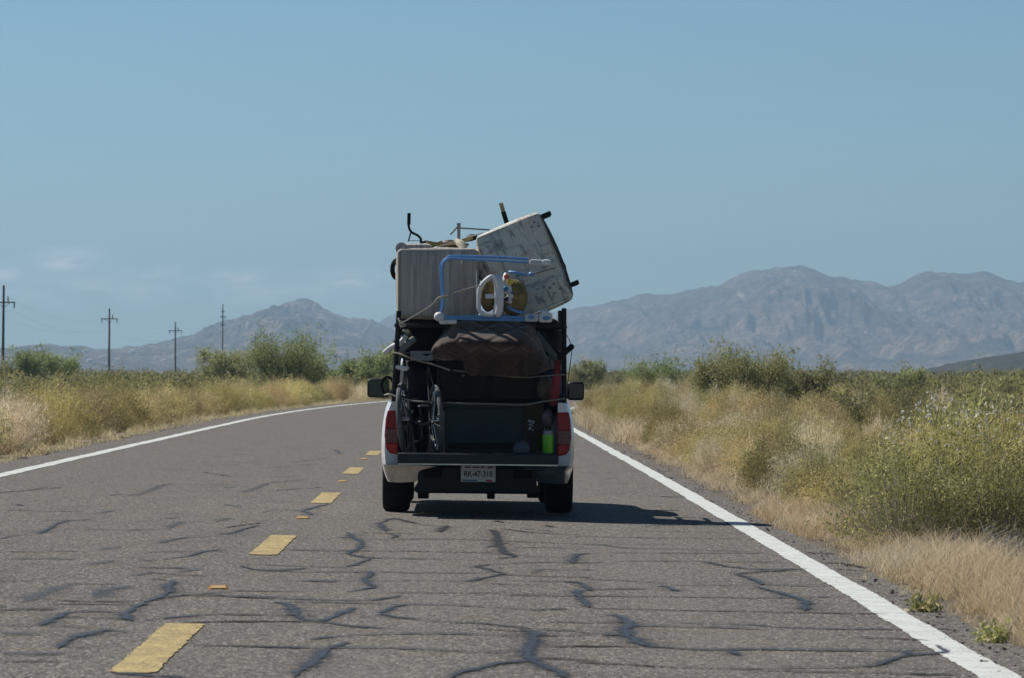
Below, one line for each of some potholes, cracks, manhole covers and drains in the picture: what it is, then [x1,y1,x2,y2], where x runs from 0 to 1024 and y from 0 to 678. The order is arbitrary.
crack [372,524,771,612]
crack [481,621,767,669]
